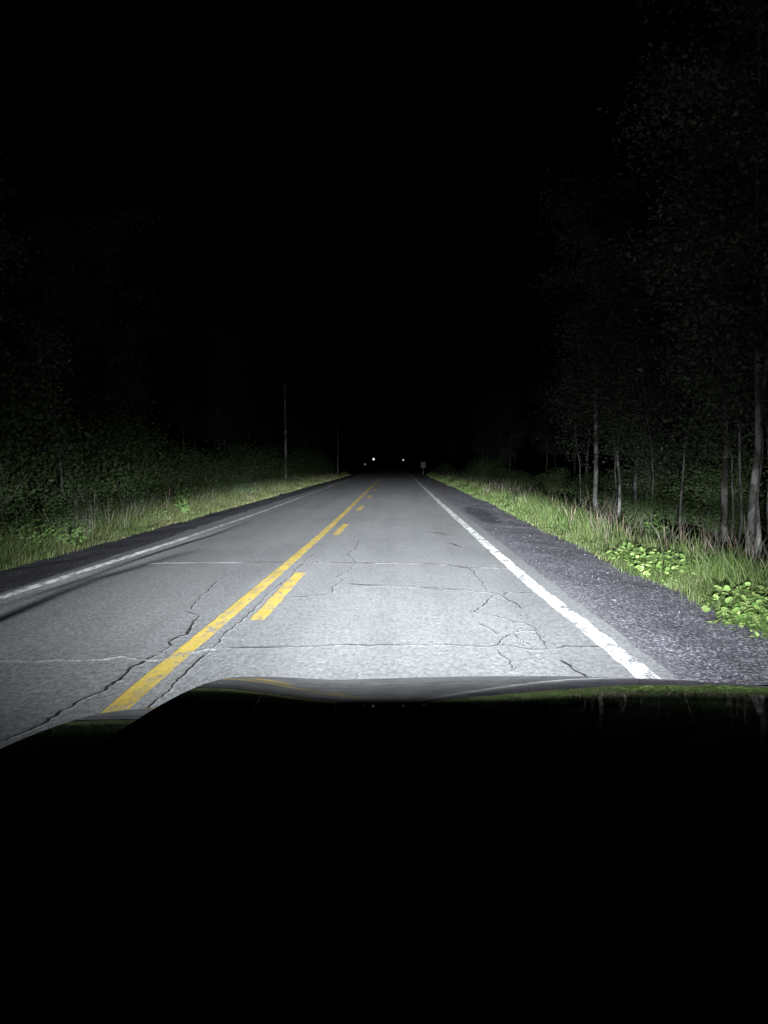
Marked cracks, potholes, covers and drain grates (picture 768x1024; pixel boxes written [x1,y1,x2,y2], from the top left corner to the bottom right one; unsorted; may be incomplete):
crack [0,532,601,744]
